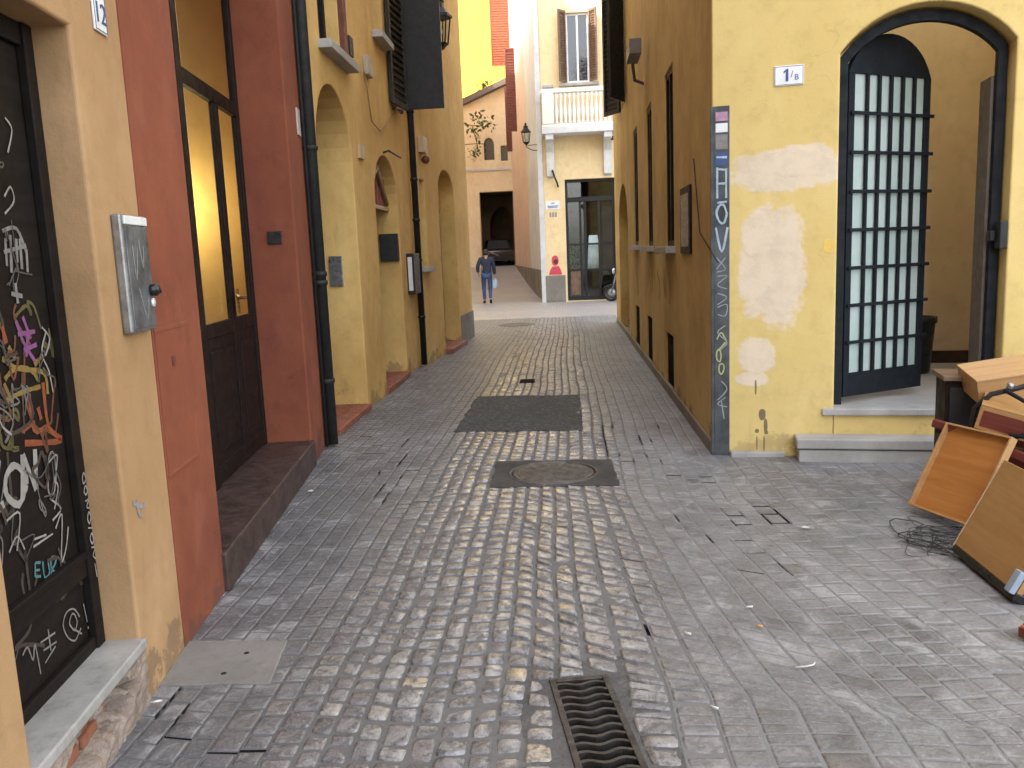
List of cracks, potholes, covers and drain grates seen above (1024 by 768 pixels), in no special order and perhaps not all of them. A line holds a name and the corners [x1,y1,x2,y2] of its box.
manhole cover [490,459,620,490]
crack [155,688,267,756]
drain grate [511,656,687,768]
